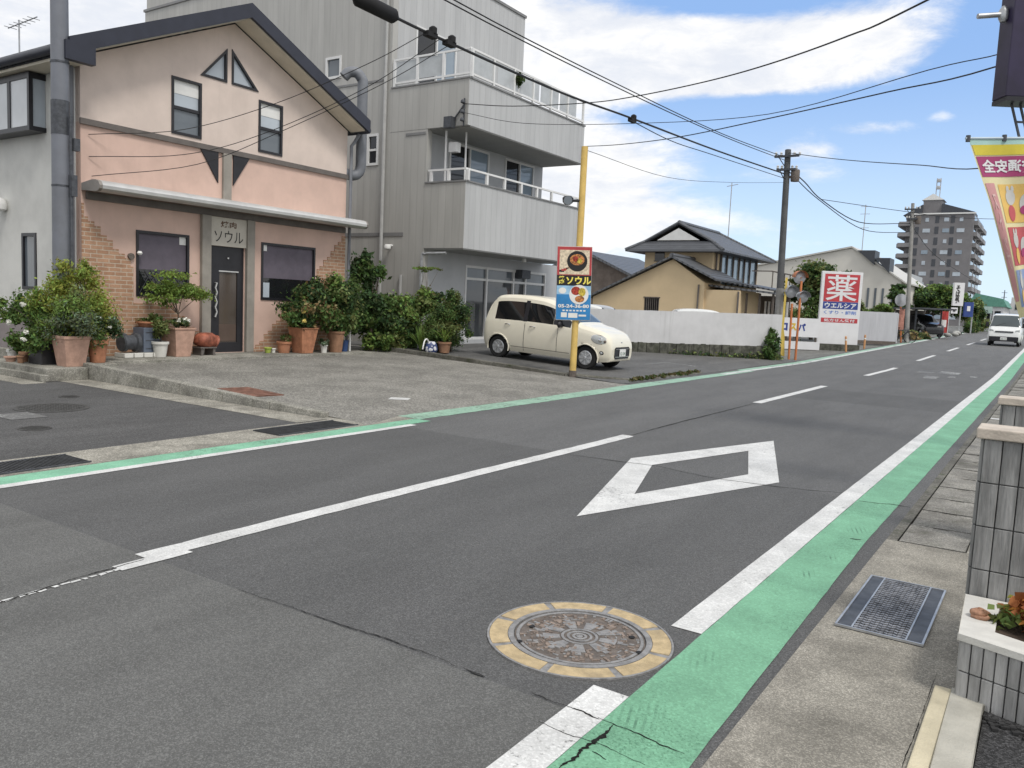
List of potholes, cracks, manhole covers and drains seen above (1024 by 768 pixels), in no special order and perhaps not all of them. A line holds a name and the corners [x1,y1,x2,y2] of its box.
drain grate [0,454,92,475]
utility cover [217,387,284,397]
drain grate [253,420,358,436]
manhole cover [12,403,90,413]
drain grate [834,575,946,647]
crack [532,693,683,768]
manhole cover [487,601,674,681]
